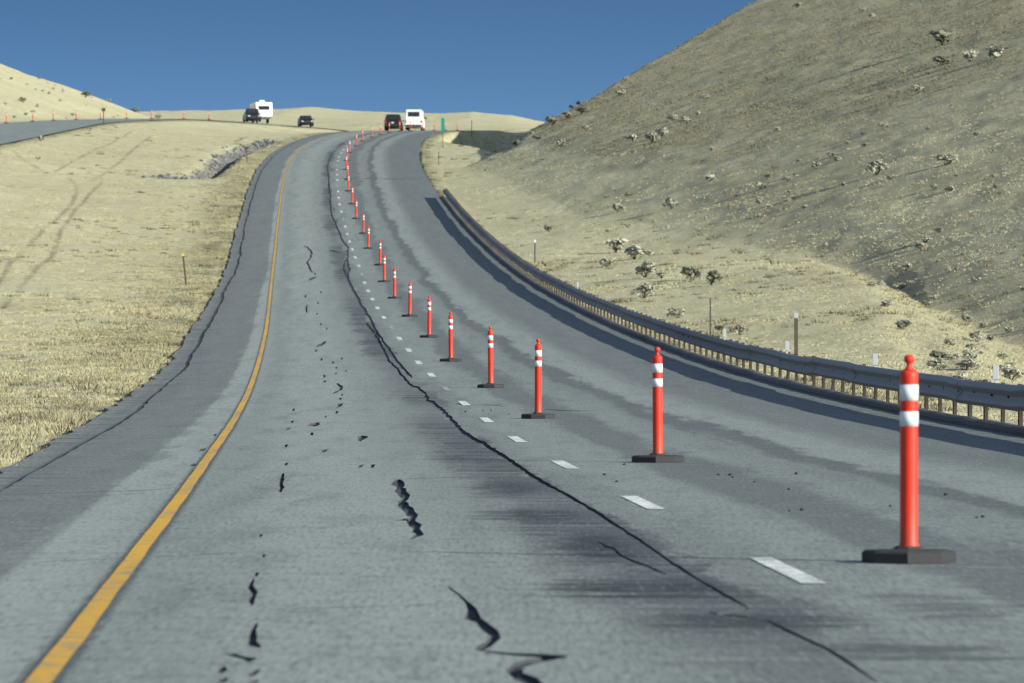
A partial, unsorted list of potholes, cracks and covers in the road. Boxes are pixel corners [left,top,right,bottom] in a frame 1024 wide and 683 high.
crack [223,144,879,683]
